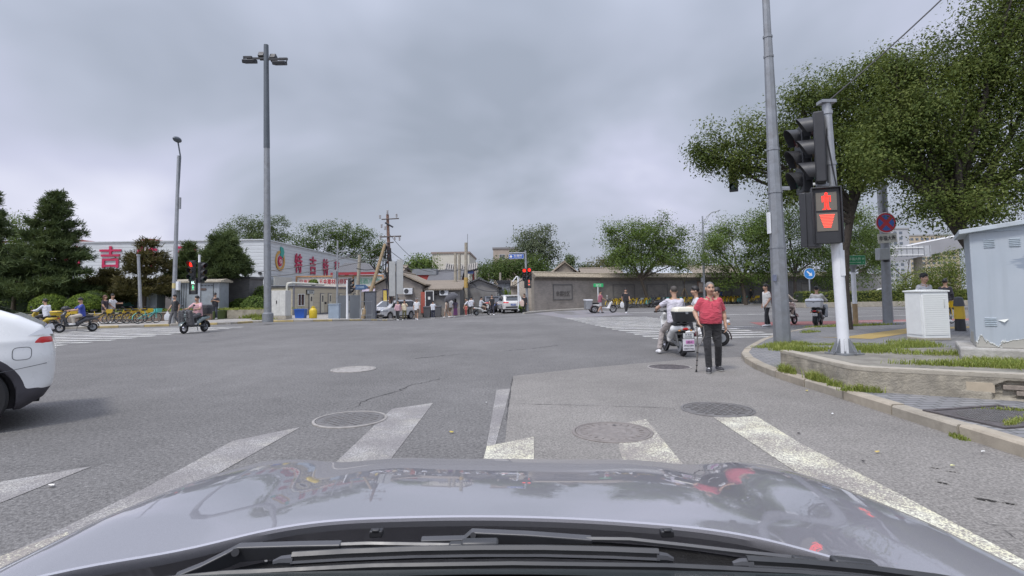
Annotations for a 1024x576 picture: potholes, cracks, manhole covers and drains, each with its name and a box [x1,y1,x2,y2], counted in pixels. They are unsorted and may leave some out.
manhole cover [680,402,756,417]
manhole cover [312,411,388,429]
manhole cover [572,422,654,443]
